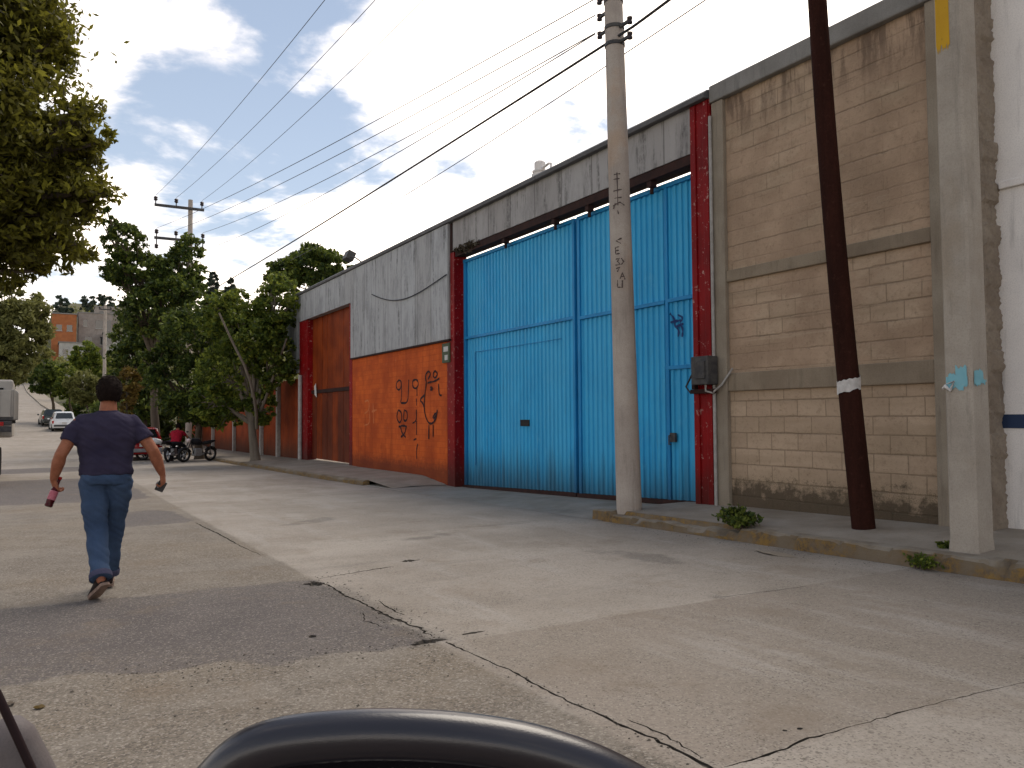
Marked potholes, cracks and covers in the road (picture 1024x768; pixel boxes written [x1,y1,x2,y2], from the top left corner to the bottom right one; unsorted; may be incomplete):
crack [313,566,1024,768]
